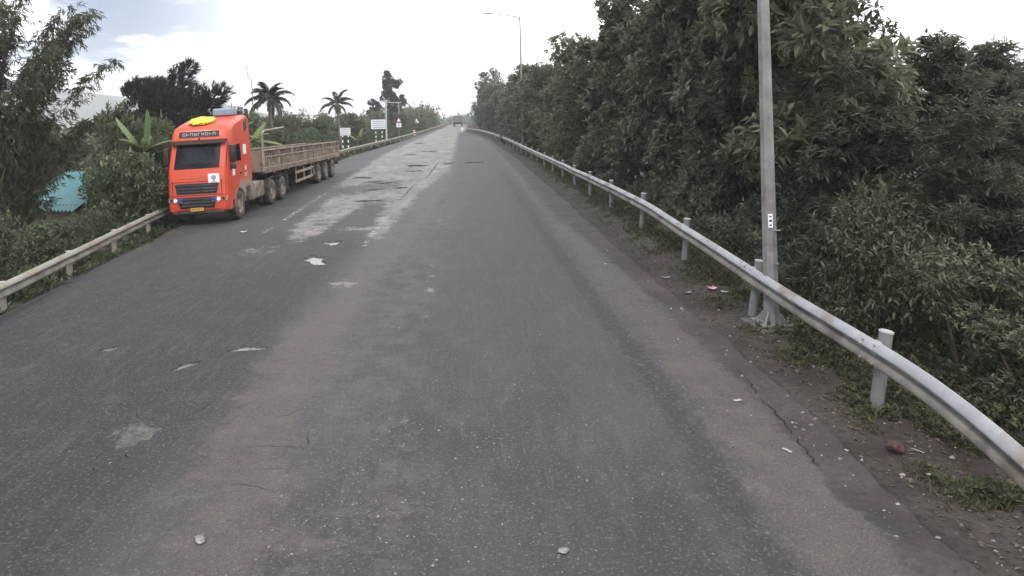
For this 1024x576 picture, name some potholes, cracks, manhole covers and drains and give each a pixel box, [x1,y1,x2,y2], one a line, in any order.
pothole [170,360,204,371]
crack [738,370,816,465]
crack [44,406,206,479]
pothole [302,255,327,265]
